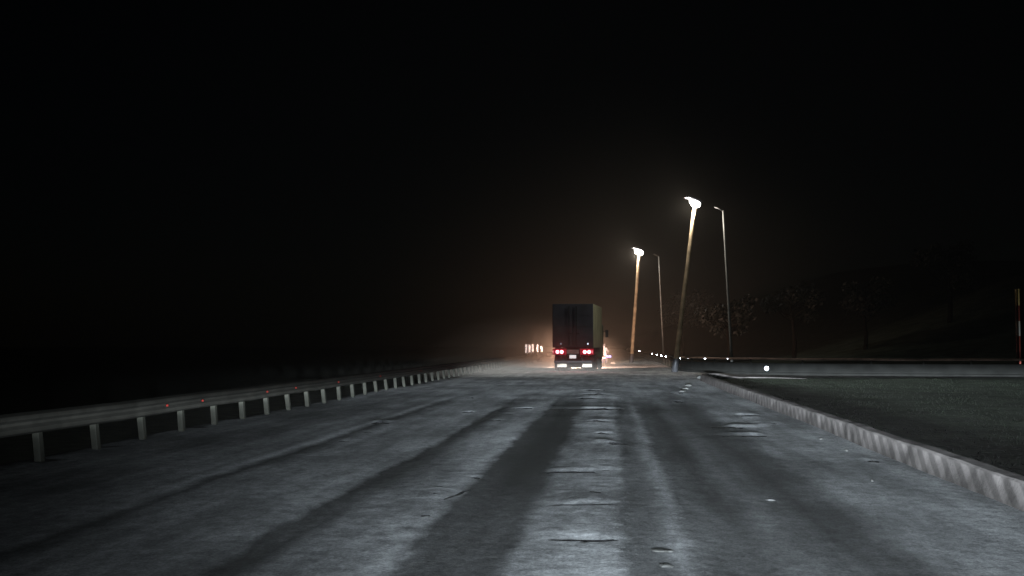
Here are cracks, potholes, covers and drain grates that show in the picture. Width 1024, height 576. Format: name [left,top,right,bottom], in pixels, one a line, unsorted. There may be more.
crack [552,491,612,506]
